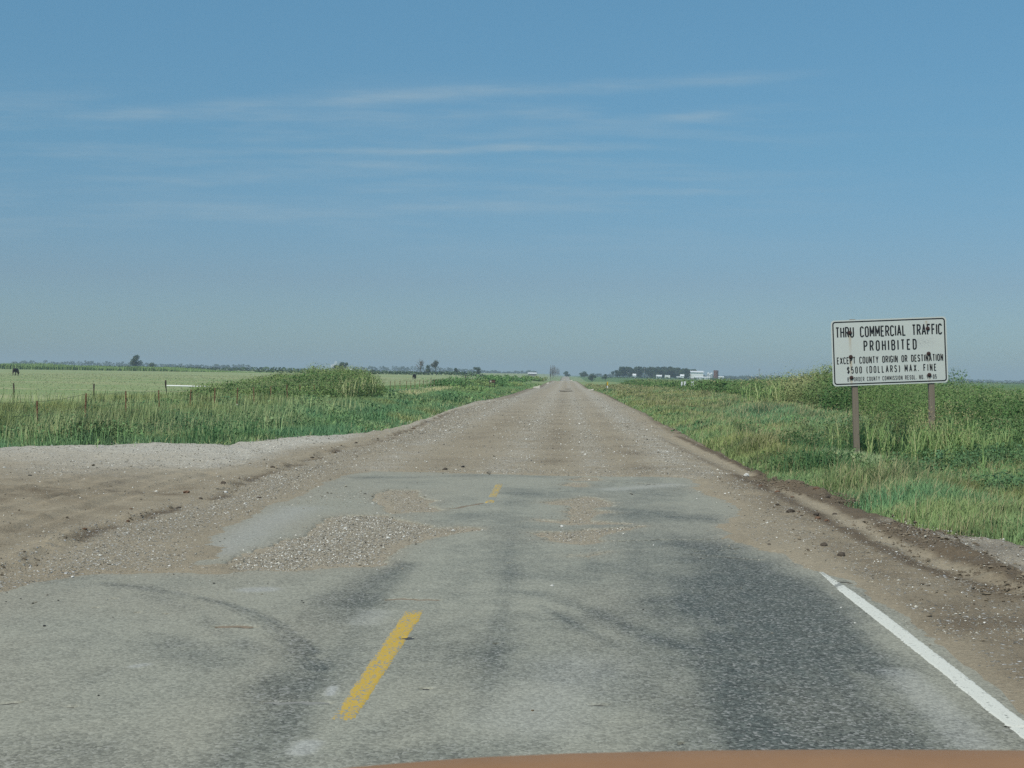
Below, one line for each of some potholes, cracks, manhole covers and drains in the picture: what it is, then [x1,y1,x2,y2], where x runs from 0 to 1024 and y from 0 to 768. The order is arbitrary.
pothole [524,496,622,527]
pothole [182,512,492,575]
pothole [368,489,449,514]
pothole [527,524,646,548]
